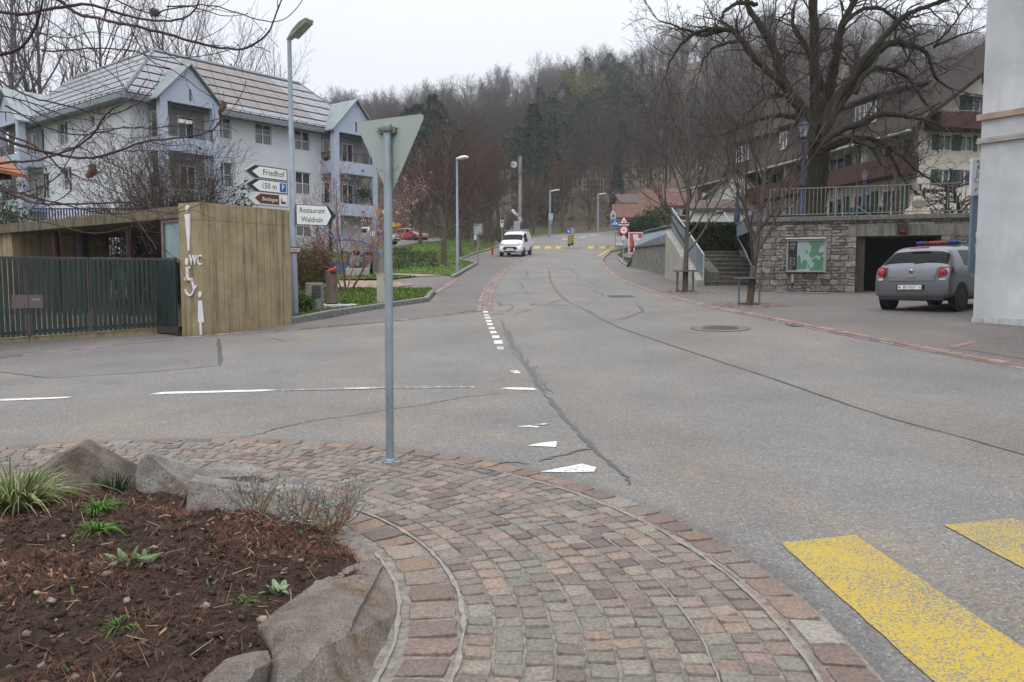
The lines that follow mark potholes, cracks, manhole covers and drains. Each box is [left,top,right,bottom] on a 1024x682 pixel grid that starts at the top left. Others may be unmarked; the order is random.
crack [241,393,501,437]
crack [497,268,1024,485]
